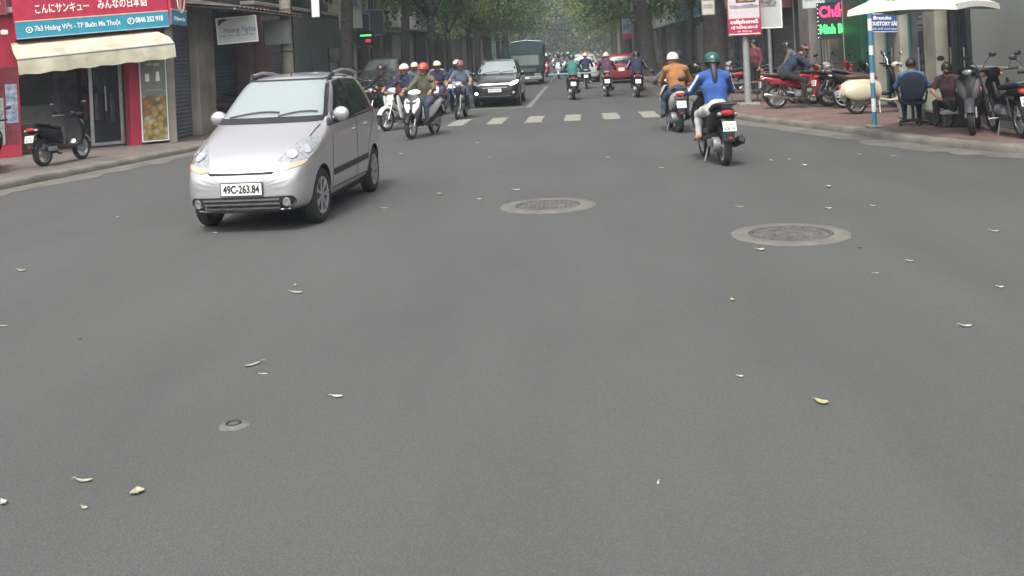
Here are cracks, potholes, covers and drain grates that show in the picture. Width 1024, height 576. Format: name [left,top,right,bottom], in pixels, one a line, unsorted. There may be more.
manhole cover [499,198,597,214]
manhole cover [218,419,250,431]
manhole cover [730,223,851,246]
